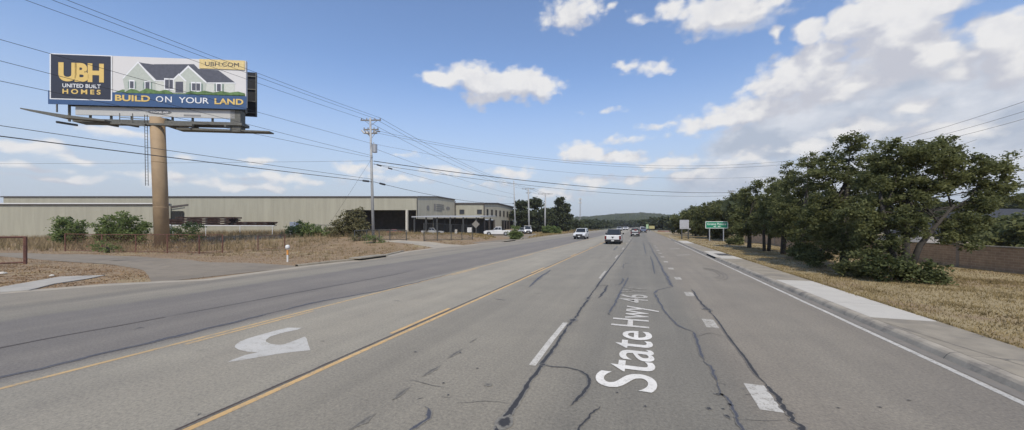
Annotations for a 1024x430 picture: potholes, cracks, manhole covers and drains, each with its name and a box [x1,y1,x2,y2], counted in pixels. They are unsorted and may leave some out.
crack [703,360,777,430]
crack [598,246,629,315]
crack [577,407,600,430]
